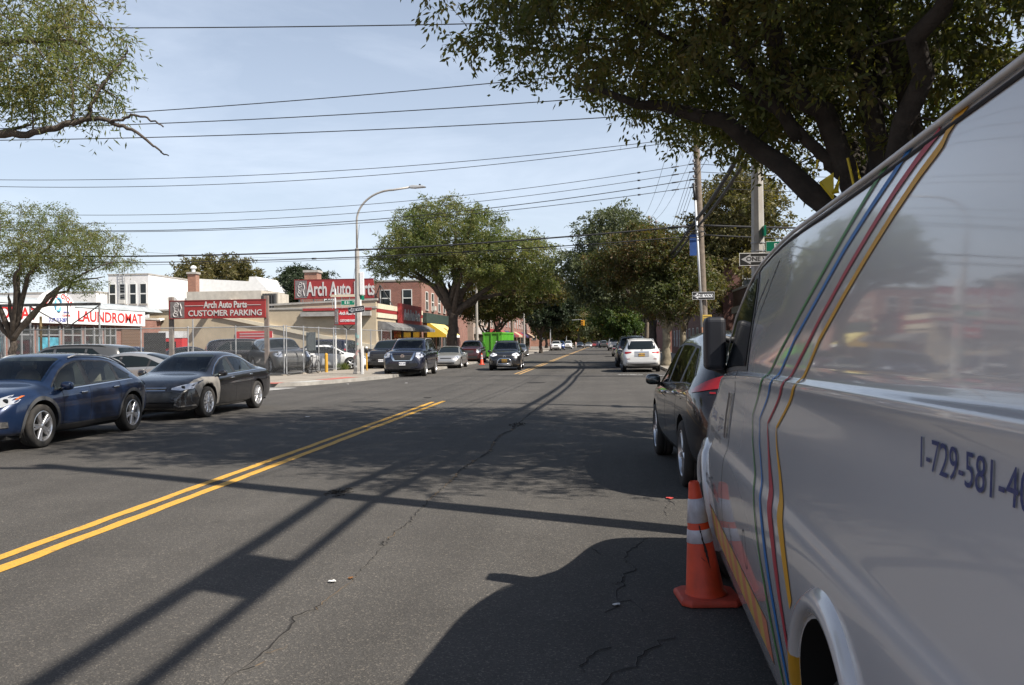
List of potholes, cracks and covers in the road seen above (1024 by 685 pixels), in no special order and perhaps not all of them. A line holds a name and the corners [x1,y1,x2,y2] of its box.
crack [223,388,556,685]
crack [578,635,676,685]
crack [590,538,647,612]
